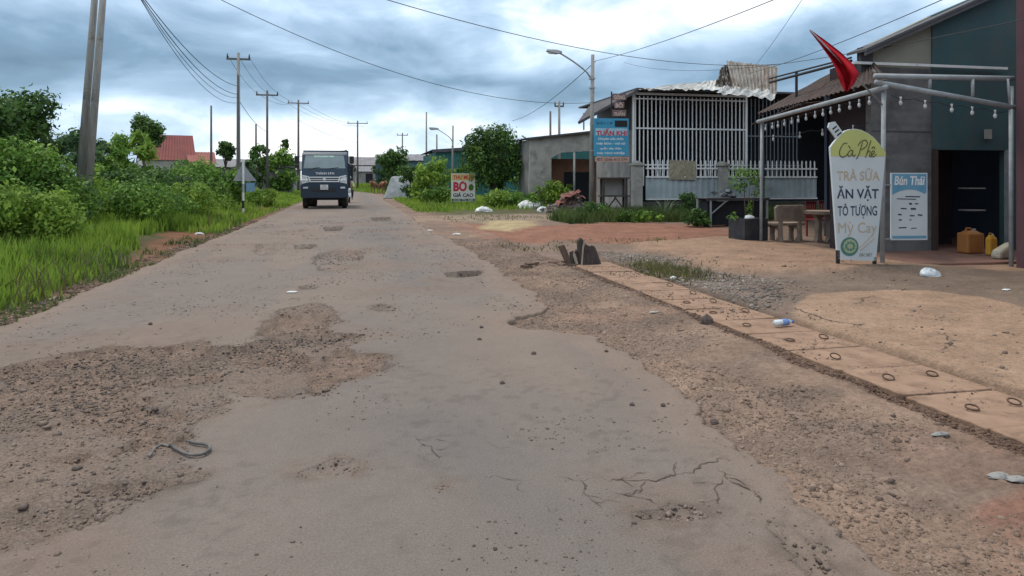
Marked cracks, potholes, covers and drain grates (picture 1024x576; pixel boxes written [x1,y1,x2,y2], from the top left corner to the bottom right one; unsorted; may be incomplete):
pothole [444,270,485,278]
crack [561,457,762,507]
pothole [0,303,449,556]
pothole [311,251,365,272]
